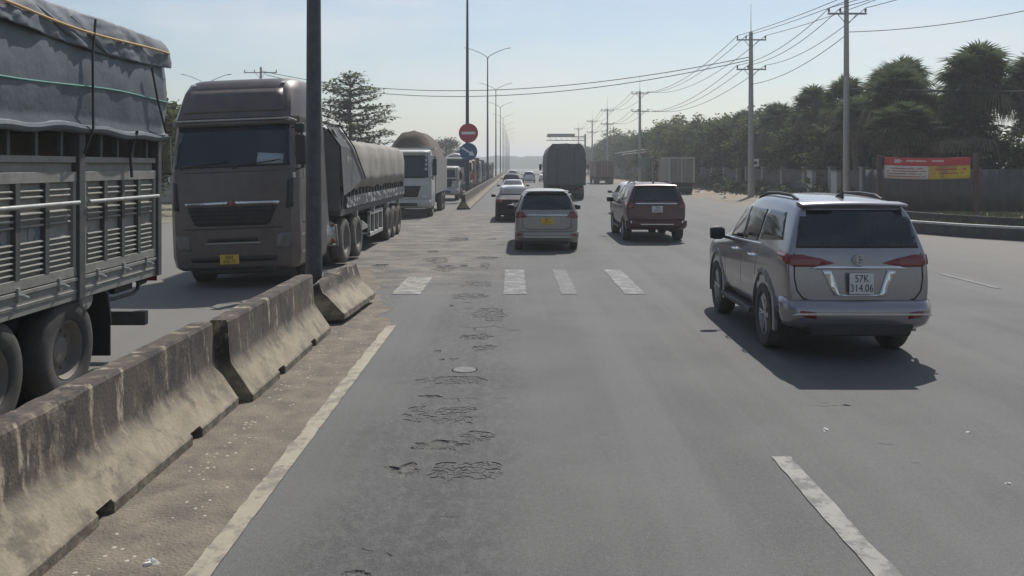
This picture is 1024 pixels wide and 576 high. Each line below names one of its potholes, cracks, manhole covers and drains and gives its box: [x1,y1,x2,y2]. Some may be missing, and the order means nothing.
crack [402,376,503,481]
crack [422,257,458,273]
pothole [383,462,421,478]
crack [449,293,508,351]
